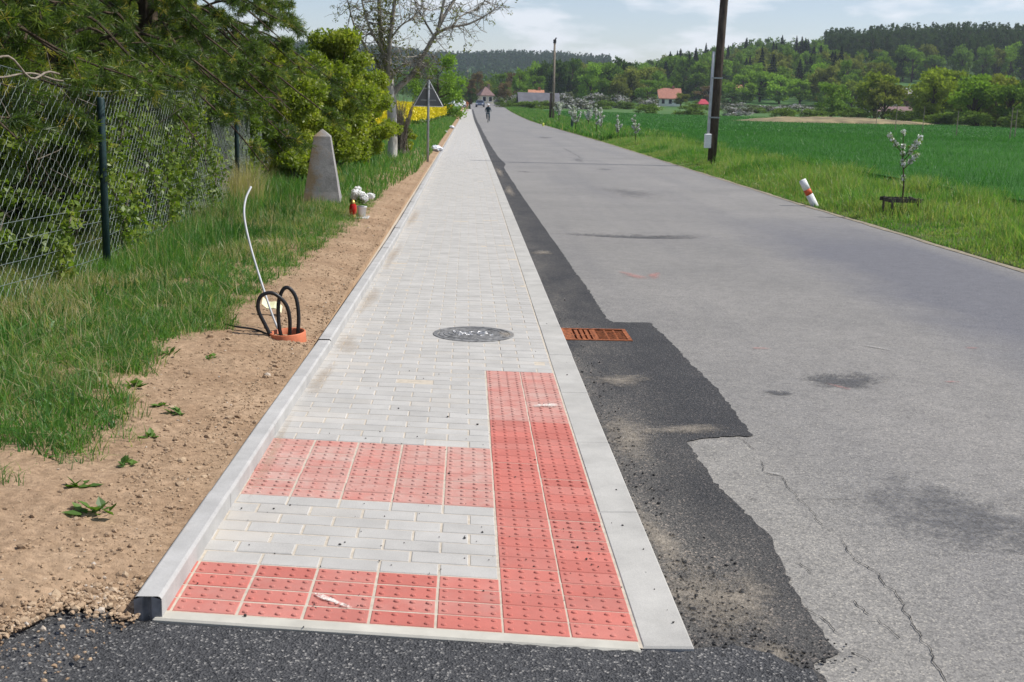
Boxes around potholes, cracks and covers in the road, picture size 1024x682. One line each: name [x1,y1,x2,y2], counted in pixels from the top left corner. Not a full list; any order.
crack [739,437,853,533]
manhole cover [433,326,514,342]
drain grate [561,328,633,341]
crack [840,536,947,682]
